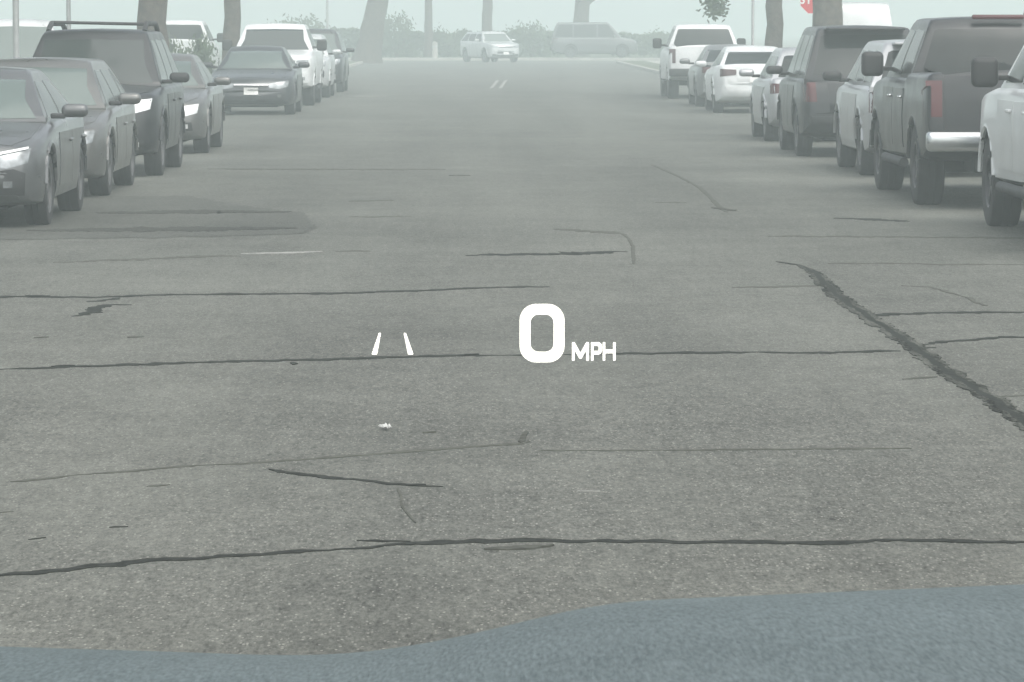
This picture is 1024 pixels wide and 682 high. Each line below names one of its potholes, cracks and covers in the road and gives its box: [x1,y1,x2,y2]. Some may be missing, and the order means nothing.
crack [465,229,636,264]
crack [10,441,530,523]
crack [0,261,1024,431]
crack [651,165,729,212]
